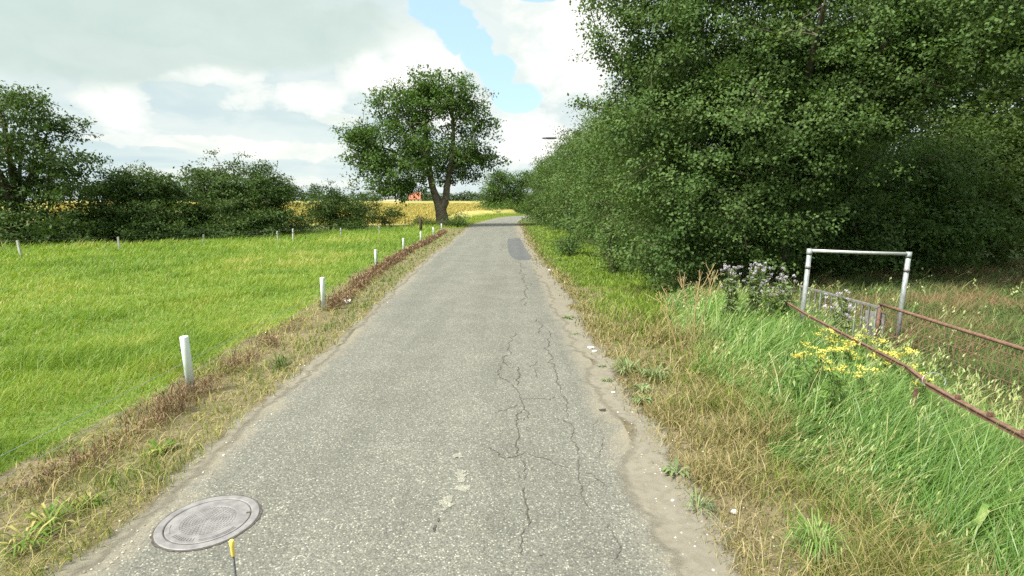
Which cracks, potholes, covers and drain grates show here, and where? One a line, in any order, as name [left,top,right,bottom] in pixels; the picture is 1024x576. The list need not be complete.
crack [489,244,621,571]
manhole cover [150,495,263,552]
